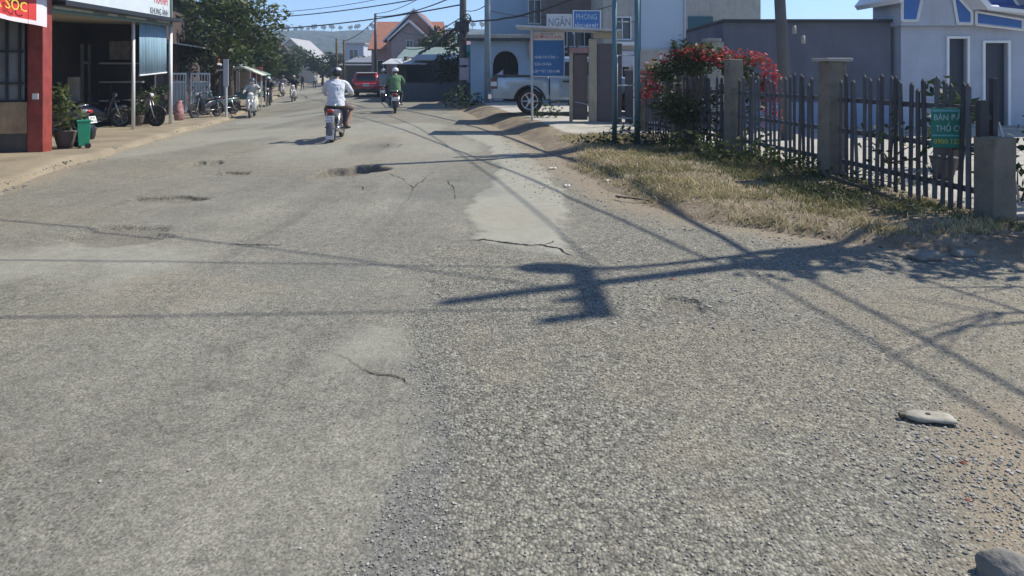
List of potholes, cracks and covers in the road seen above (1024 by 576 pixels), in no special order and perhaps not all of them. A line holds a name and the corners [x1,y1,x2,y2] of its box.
crack [479,239,573,256]
pothole [302,163,400,179]
pothole [121,194,220,203]
crack [334,353,407,383]
pothole [170,159,229,168]
pothole [38,223,190,252]
